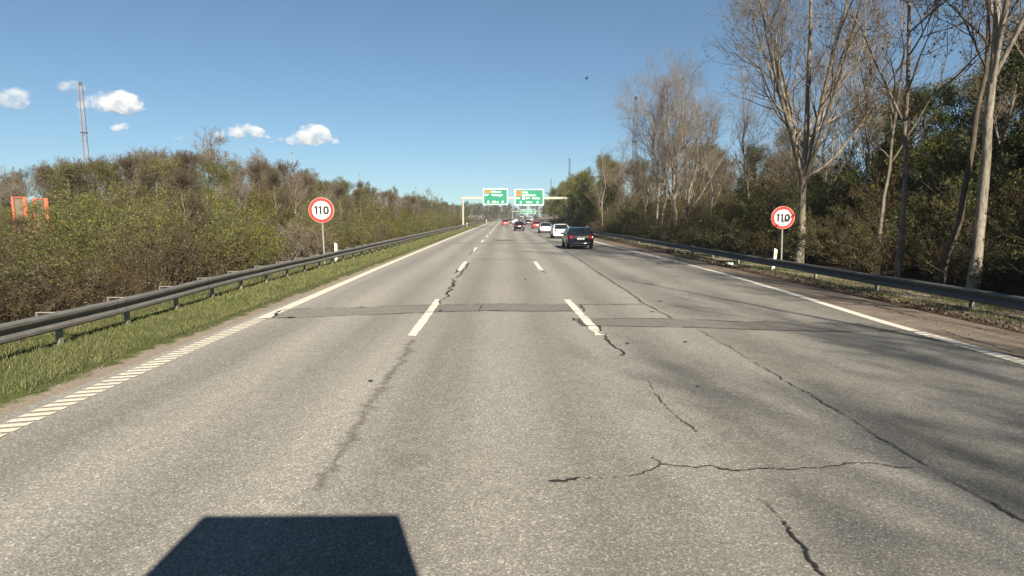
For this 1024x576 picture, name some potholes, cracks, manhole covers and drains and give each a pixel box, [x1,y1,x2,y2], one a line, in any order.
crack [759,498,826,576]
crack [573,304,625,356]
crack [439,249,473,304]
